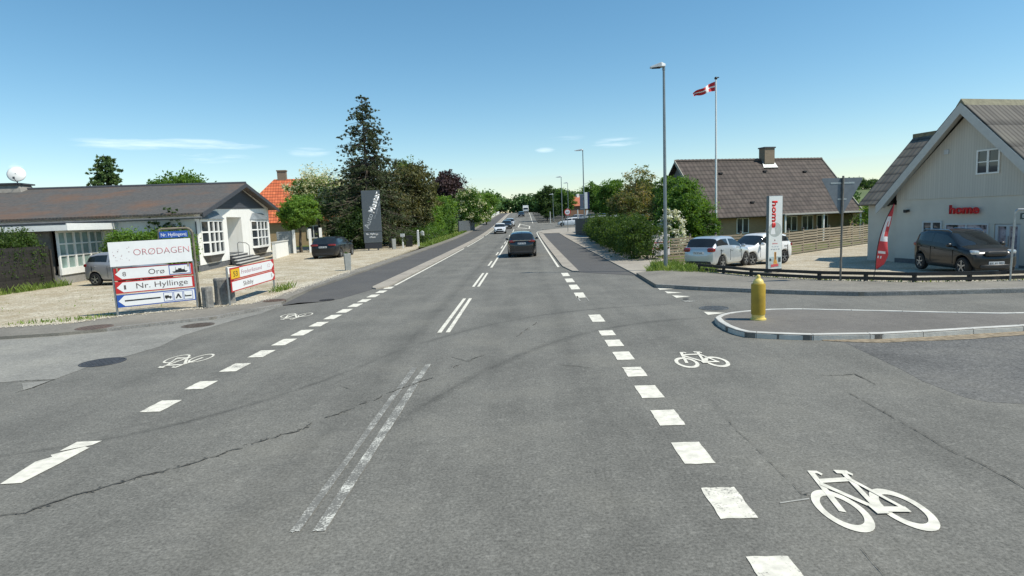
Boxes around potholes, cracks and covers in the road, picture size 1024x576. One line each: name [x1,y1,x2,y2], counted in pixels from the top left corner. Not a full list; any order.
manhole cover [78,357,127,367]
crack [0,355,483,516]
